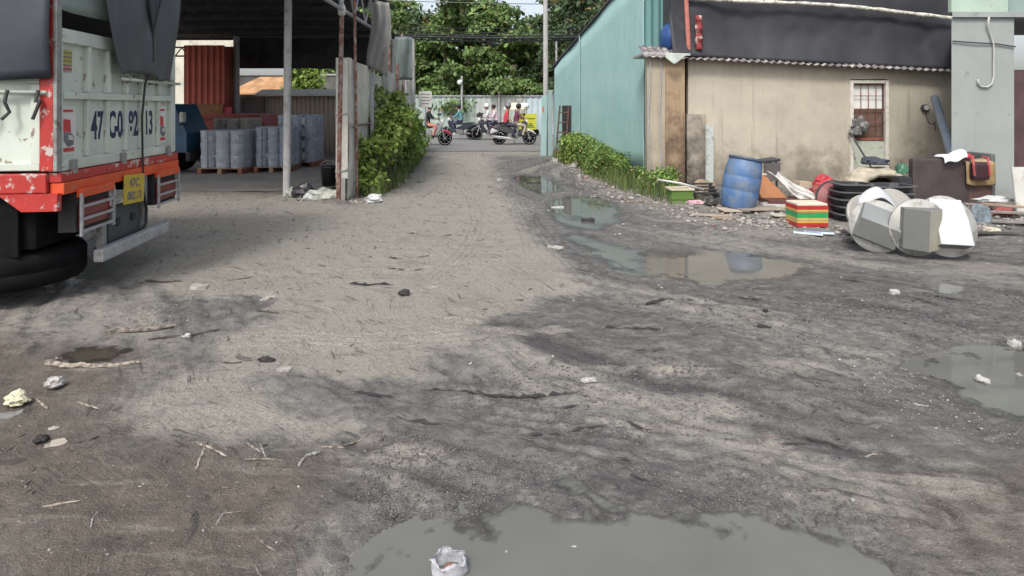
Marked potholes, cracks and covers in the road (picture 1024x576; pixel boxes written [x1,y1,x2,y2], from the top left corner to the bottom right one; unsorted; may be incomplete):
pothole [900,346,1024,435]
pothole [345,465,916,576]
pothole [547,196,623,231]
pothole [589,250,814,285]
pothole [508,174,565,193]
pothole [54,344,134,363]
